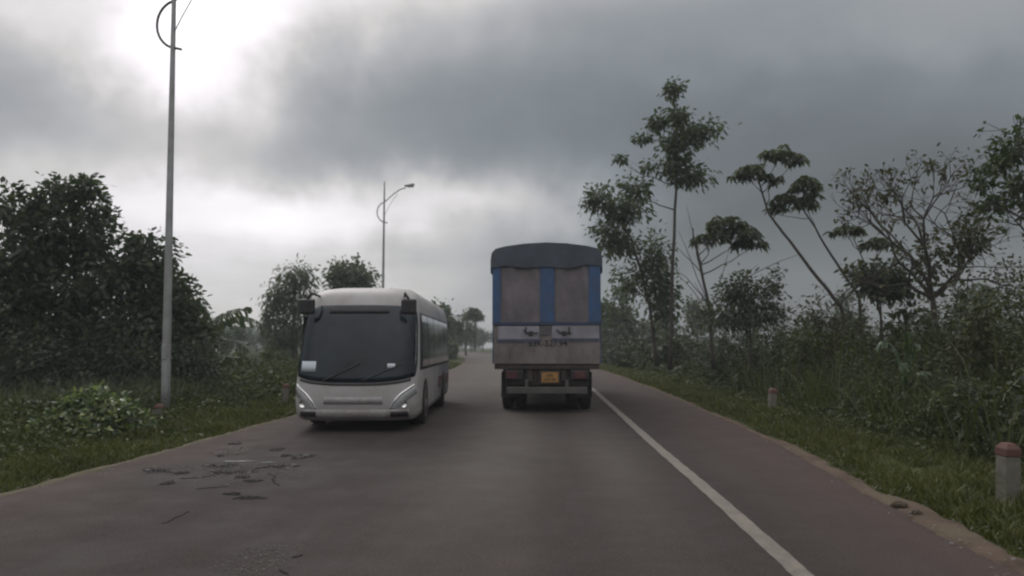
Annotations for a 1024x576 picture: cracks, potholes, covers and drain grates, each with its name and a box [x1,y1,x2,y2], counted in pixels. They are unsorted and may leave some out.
crack [150,471,217,489]
